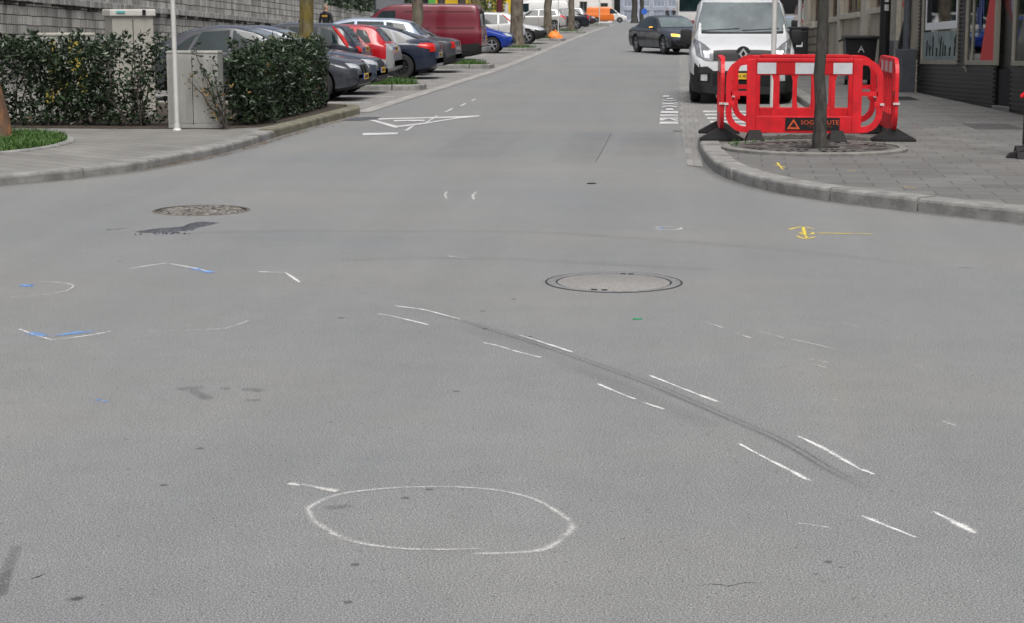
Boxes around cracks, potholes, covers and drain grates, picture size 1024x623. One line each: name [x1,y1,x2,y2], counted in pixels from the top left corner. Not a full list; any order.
manhole cover [152,205,250,216]
pothole [137,222,217,233]
manhole cover [545,272,683,293]
